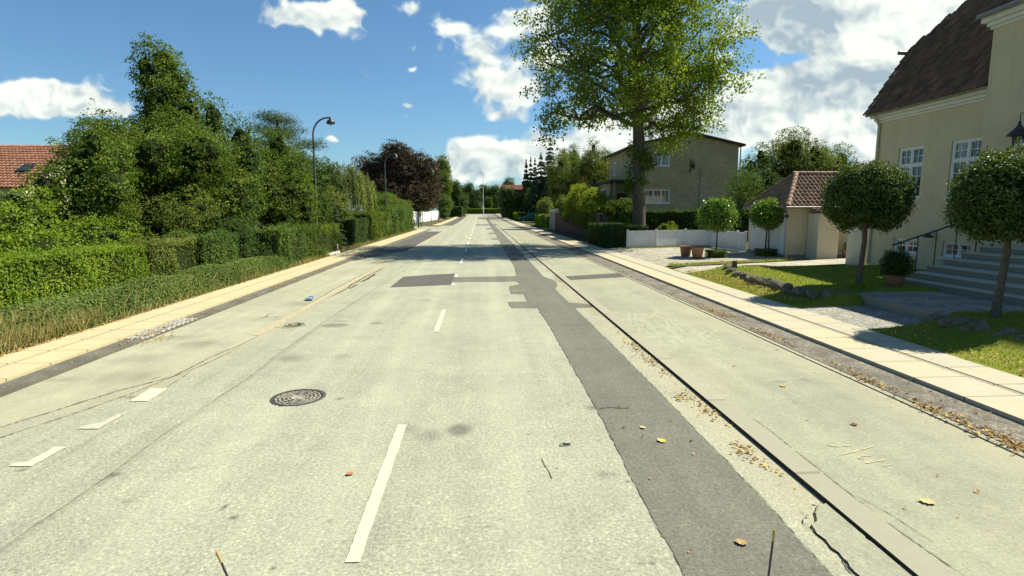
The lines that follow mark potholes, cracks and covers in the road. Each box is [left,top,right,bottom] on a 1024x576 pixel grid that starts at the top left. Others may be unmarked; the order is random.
manhole cover [270,389,326,406]
crack [801,505,856,576]
crack [316,269,381,300]
